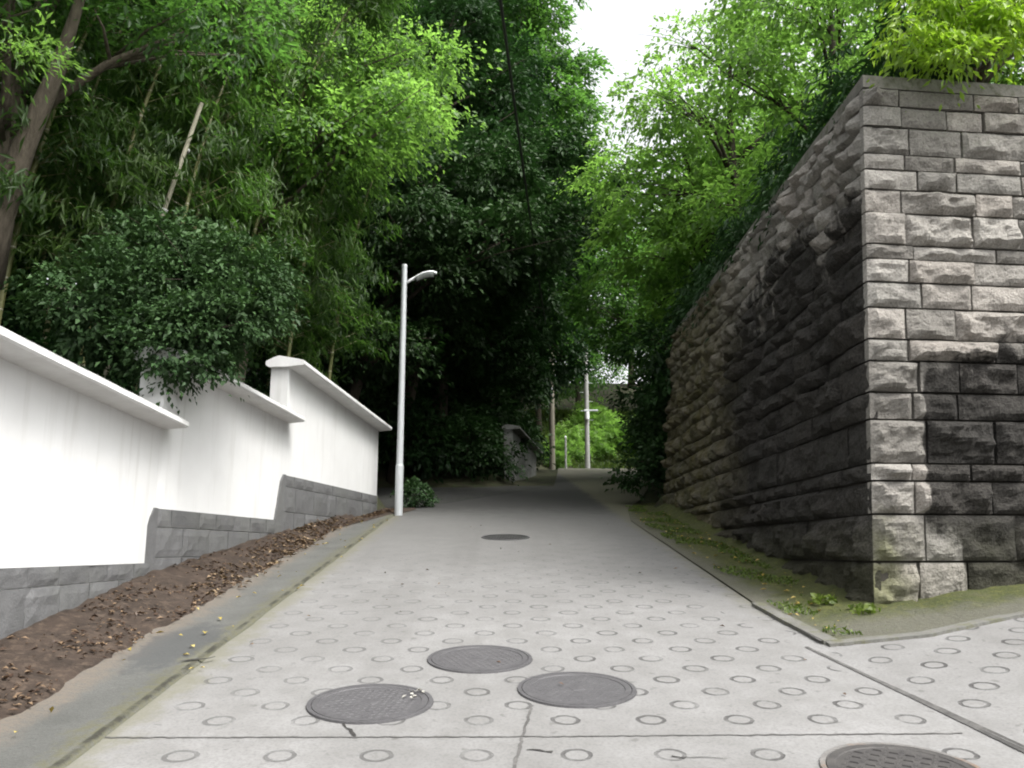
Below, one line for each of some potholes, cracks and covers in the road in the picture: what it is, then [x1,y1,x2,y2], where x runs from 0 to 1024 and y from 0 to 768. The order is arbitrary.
manhole cover [819,742,981,768]
manhole cover [517,672,637,708]
manhole cover [427,645,532,674]
manhole cover [306,684,434,724]
